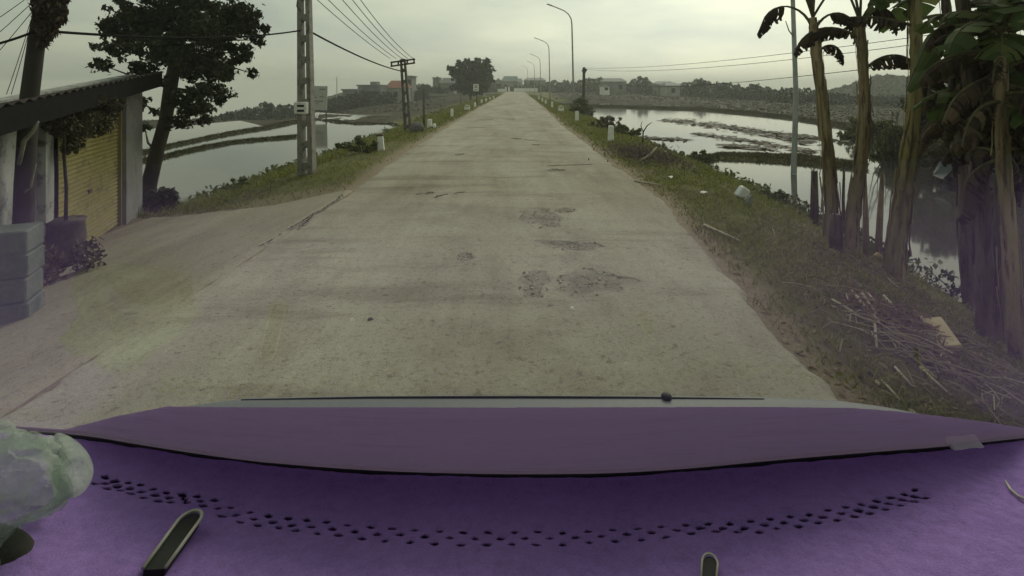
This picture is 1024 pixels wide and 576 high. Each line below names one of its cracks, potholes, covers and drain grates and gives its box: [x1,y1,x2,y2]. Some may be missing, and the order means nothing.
pothole [528,240,611,252]
pothole [516,269,553,306]
pothole [552,266,646,302]
pothole [514,206,566,230]
pothole [456,252,475,262]
